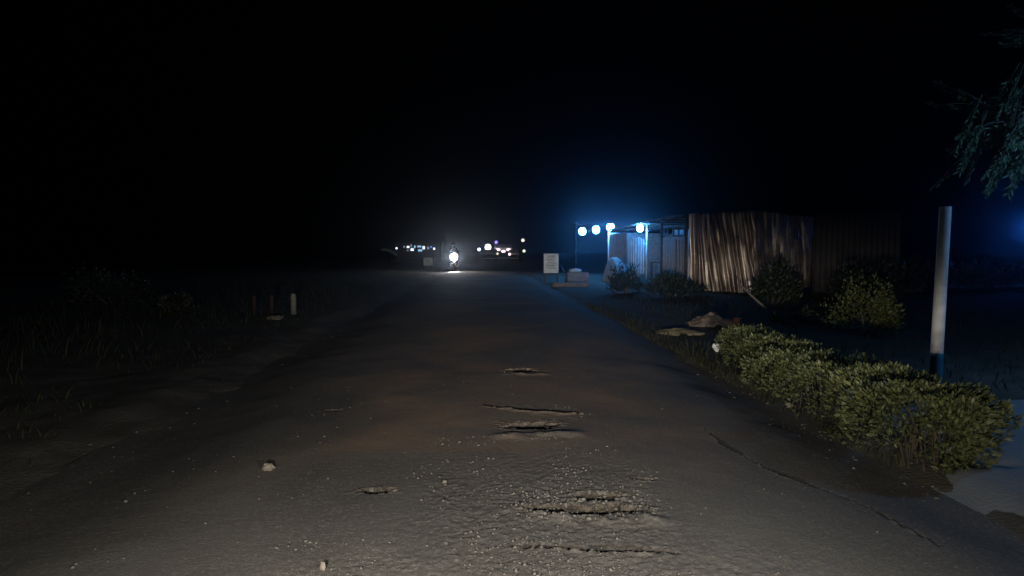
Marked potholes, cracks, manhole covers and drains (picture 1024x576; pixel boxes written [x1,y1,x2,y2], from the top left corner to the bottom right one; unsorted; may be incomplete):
crack [706,429,943,547]
pothole [569,490,626,501]
pothole [518,502,652,515]
pothole [355,486,399,494]
pothole [494,420,563,430]
crack [511,542,679,554]
crack [488,404,580,414]
